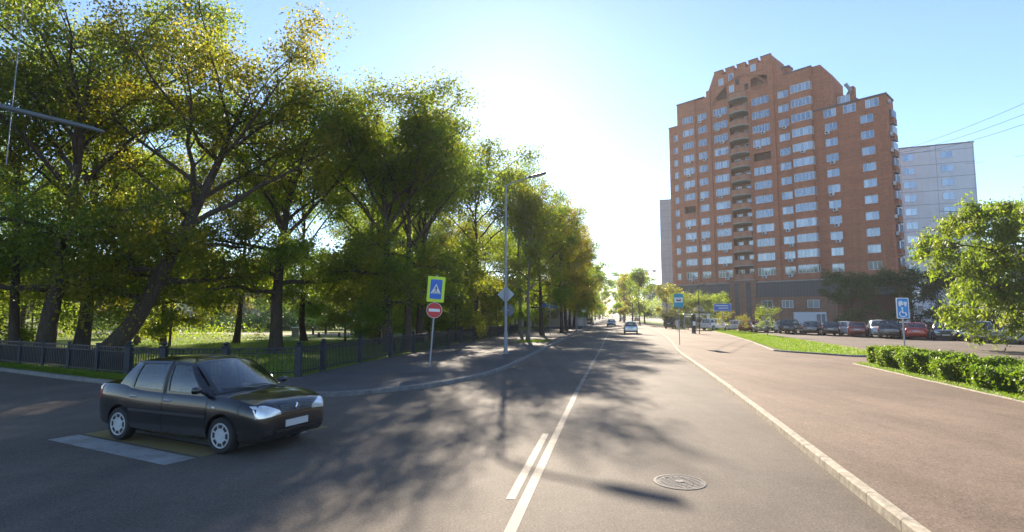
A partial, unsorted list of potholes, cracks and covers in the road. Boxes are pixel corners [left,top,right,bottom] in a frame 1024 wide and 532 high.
manhole cover [653,474,707,490]
